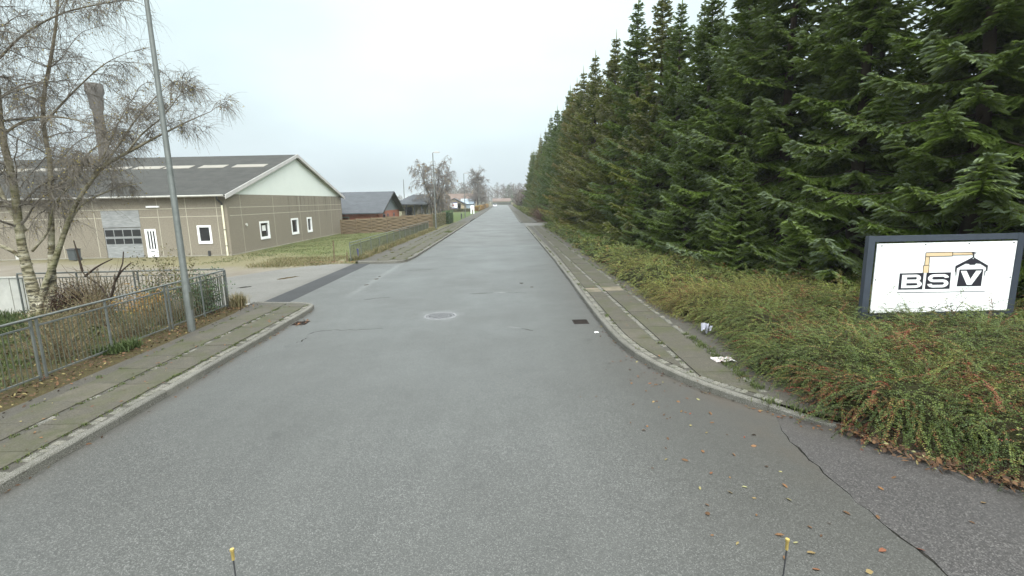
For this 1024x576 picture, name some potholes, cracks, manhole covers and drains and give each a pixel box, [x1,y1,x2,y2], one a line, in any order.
crack [780,426,948,576]
manhole cover [424,312,457,320]
